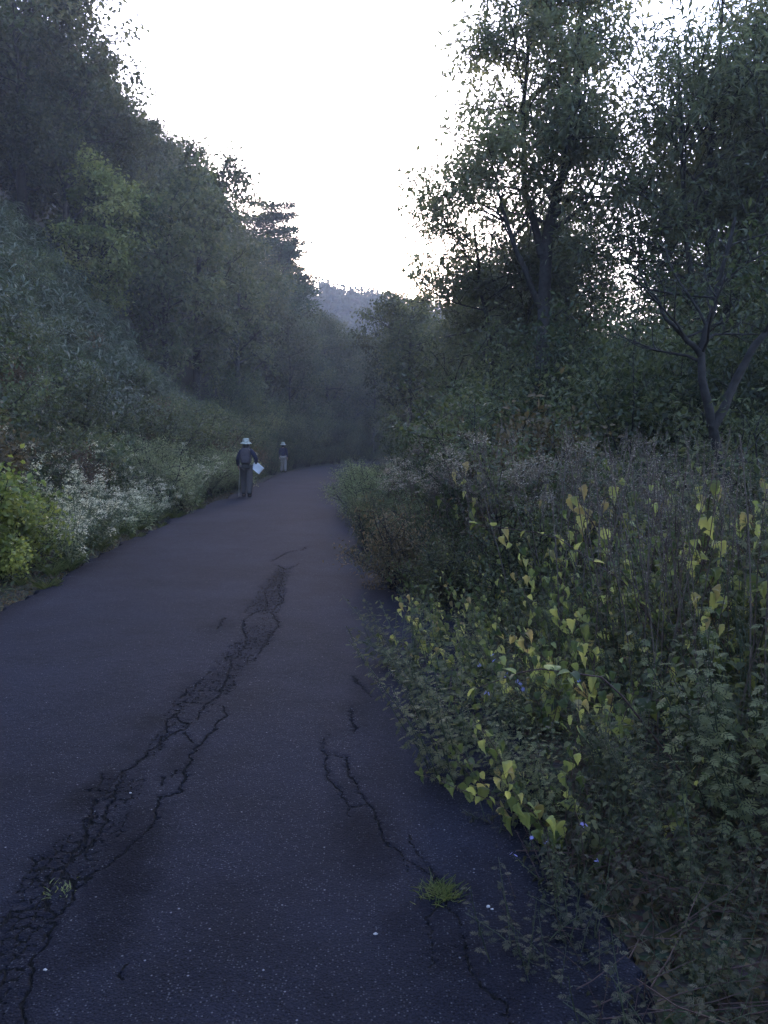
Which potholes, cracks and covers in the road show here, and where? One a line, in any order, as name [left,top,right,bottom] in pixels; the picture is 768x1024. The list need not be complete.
crack [322,735,514,1024]
crack [0,546,308,1024]
